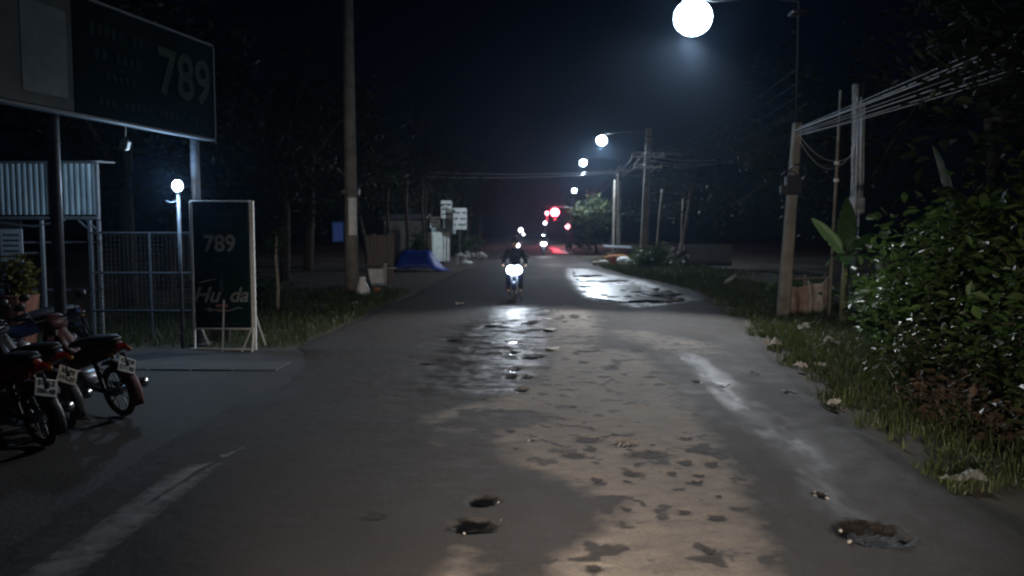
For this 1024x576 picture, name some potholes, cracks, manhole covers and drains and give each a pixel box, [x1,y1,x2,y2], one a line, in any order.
pothole [829,517,914,551]
pothole [454,519,502,534]
pothole [470,498,500,508]
